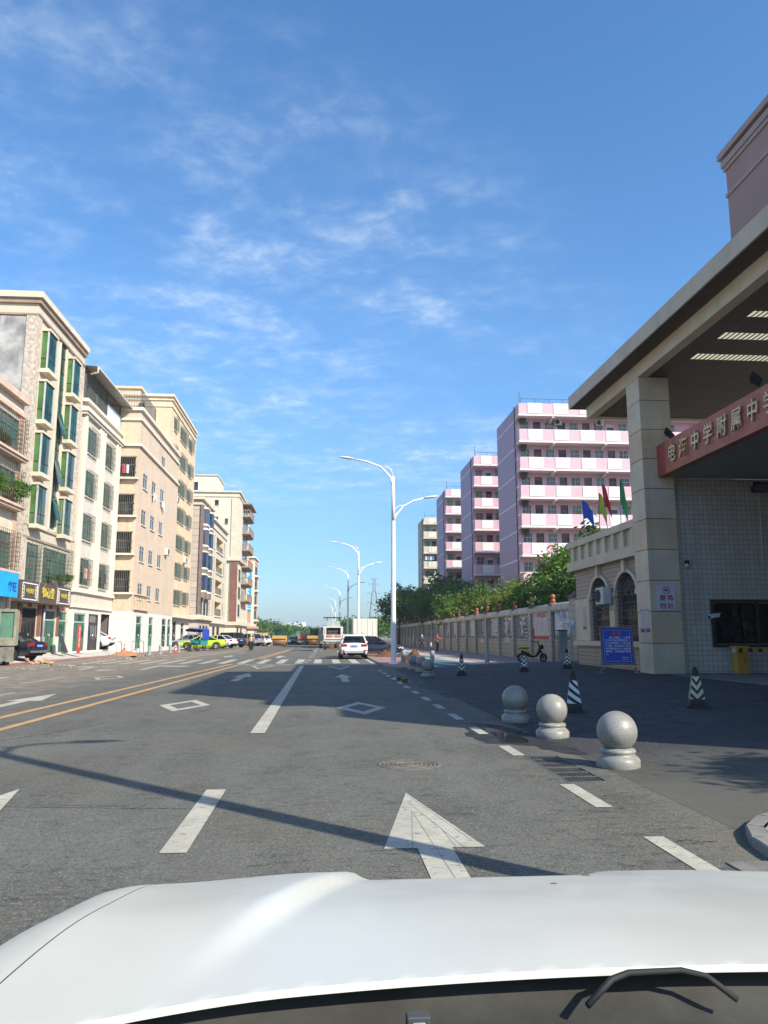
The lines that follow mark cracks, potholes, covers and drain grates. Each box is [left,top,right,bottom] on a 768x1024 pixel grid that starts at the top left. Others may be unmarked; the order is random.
drain grate [545,767,609,782]
drain grate [525,755,580,767]
manhole cover [378,759,441,770]
